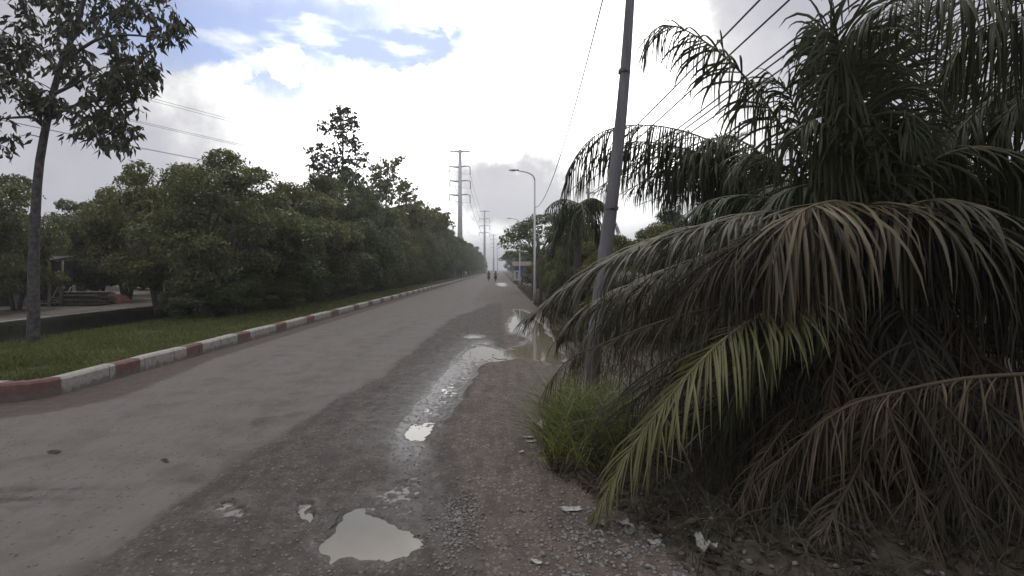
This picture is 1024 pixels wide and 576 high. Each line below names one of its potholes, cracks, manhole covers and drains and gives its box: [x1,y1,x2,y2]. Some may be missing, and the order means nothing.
pothole [188,491,272,527]
pothole [289,455,459,576]
pothole [275,493,339,534]
pothole [447,332,500,341]
pothole [371,342,527,453]
